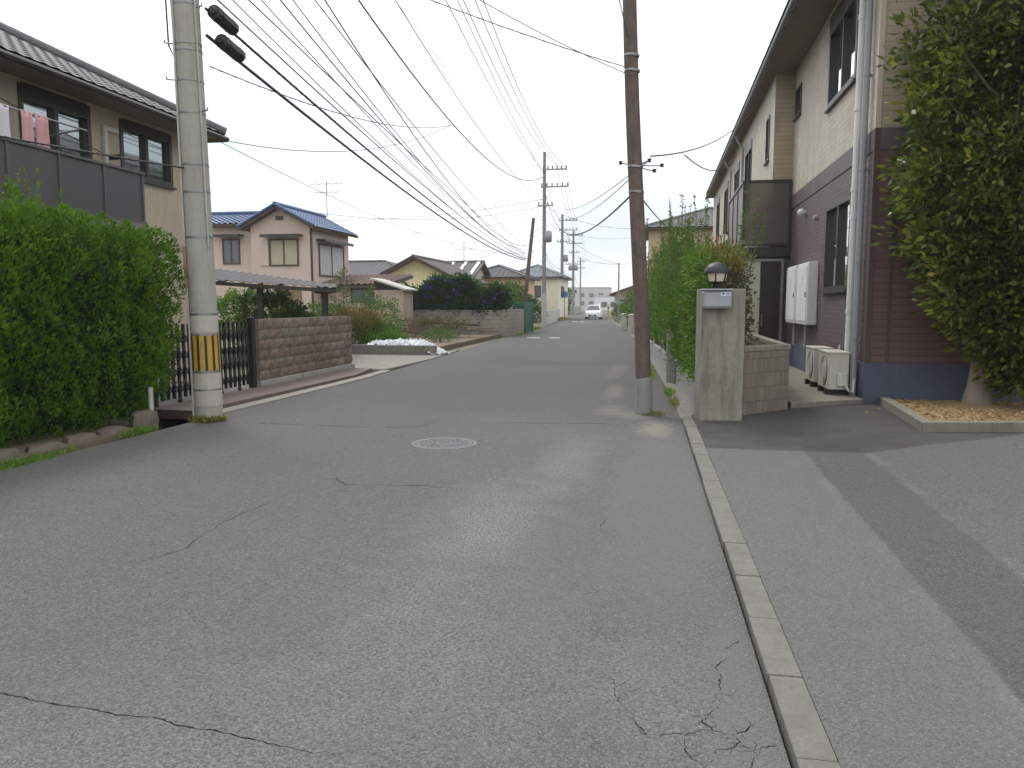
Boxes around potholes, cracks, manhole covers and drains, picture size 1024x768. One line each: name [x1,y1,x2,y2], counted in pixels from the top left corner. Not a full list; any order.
crack [589,641,777,768]
crack [133,503,268,565]
crack [318,477,454,488]
manhole cover [411,437,478,450]
crack [0,693,339,758]
